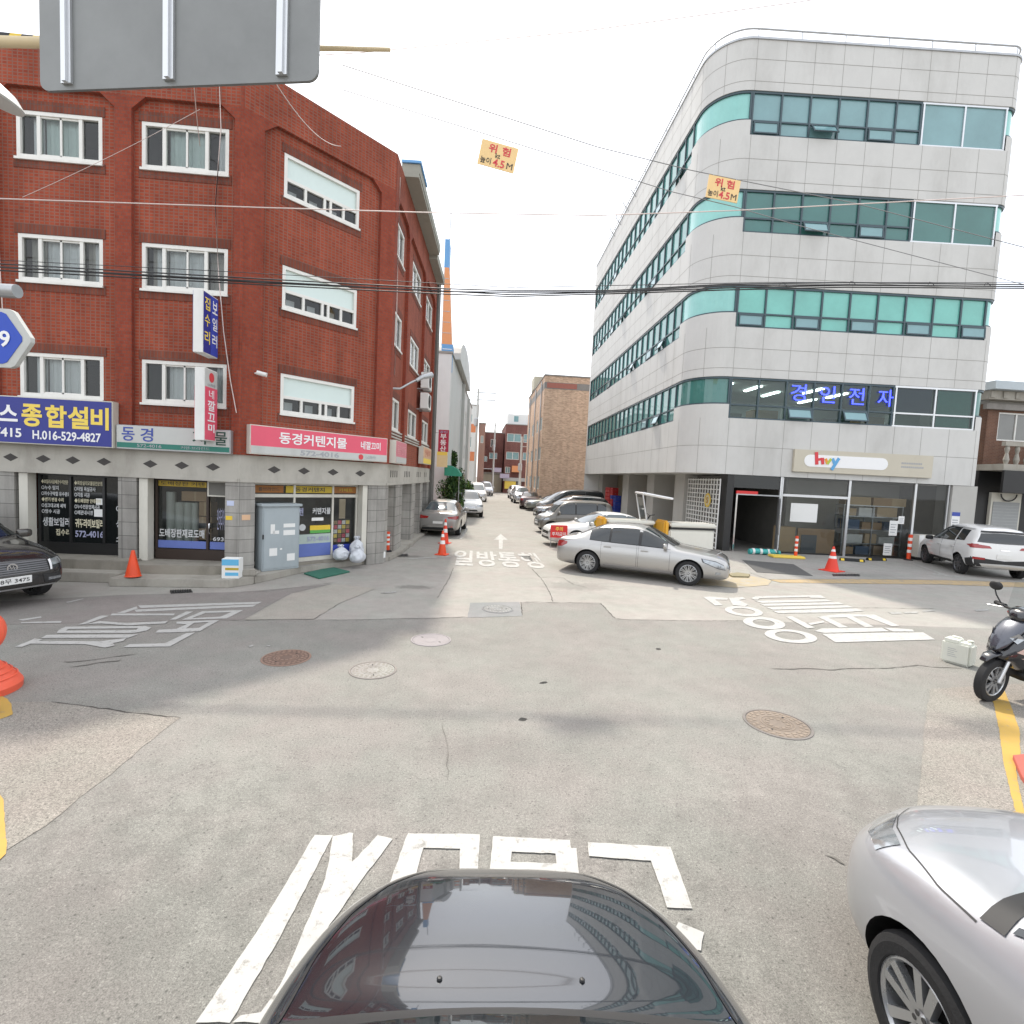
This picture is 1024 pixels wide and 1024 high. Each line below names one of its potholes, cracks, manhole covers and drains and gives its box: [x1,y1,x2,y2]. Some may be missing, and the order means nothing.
crack [521,569,612,615]
manhole cover [260,649,311,667]
manhole cover [348,661,397,679]
manhole cover [411,633,451,647]
manhole cover [742,709,814,740]
manhole cover [482,605,513,613]
